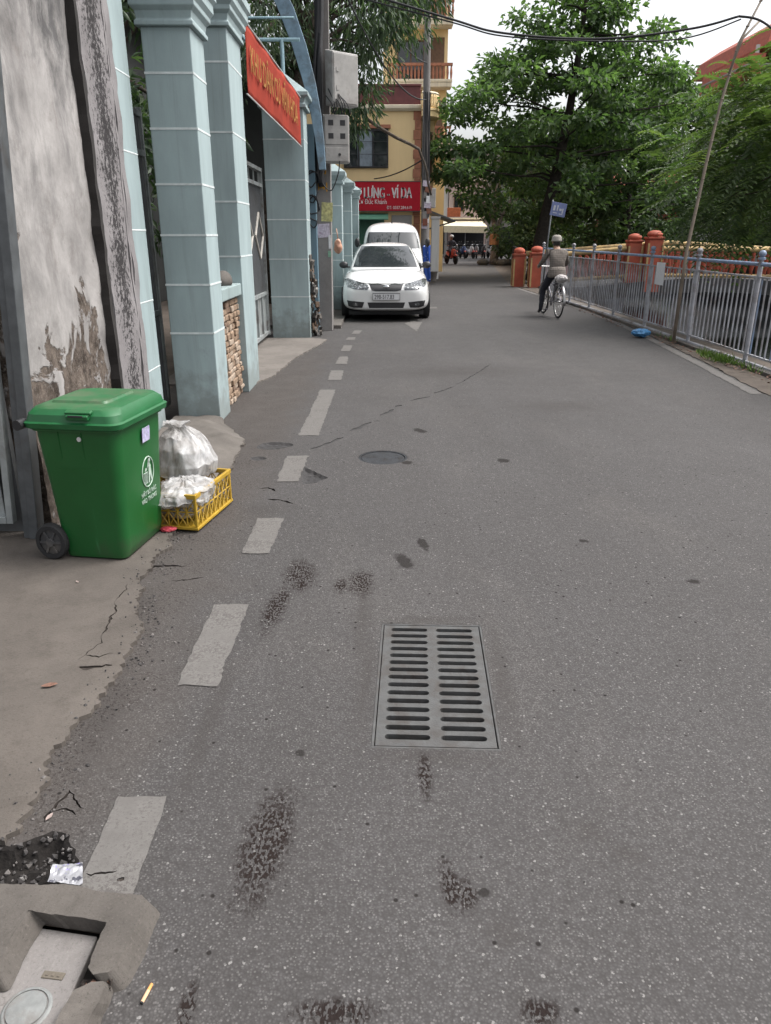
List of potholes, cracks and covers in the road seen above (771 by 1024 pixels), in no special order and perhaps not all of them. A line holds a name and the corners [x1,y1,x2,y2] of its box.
pothole [0,830,79,885]
crack [43,790,82,822]
crack [311,366,488,449]
drain grate [371,624,502,751]
manhole cover [358,451,407,464]
crack [79,565,203,670]
pothole [302,467,328,484]
